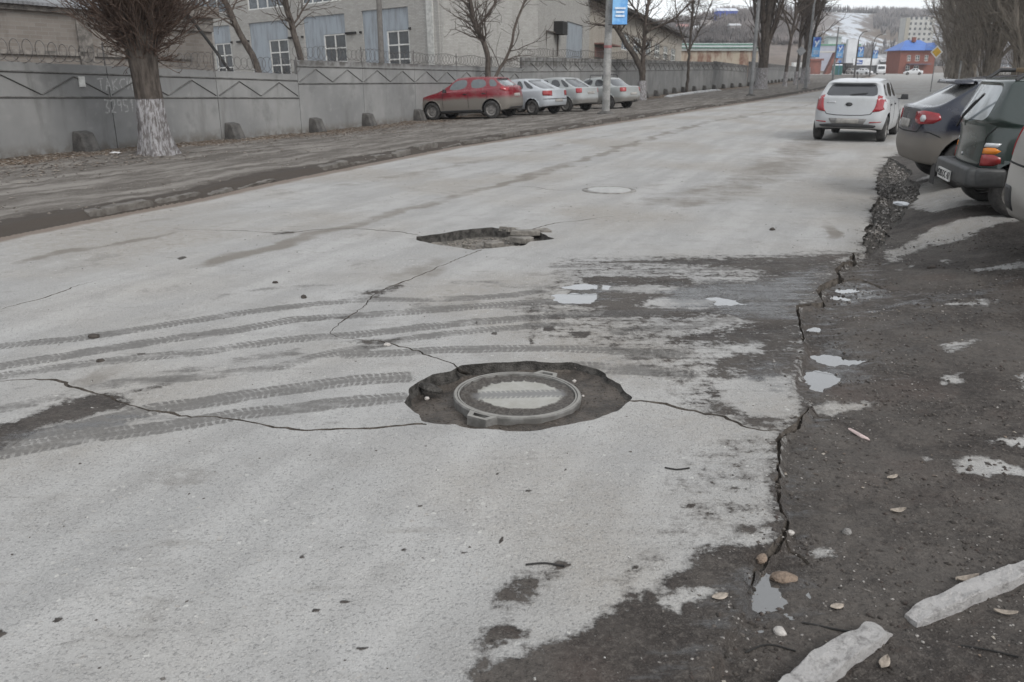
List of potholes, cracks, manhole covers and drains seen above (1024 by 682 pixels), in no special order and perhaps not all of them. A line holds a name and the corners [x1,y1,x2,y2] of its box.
pothole [862,158,921,256]
manhole cover [582,186,636,194]
manhole cover [453,370,582,427]
crack [6,378,427,431]
crack [330,250,481,375]
pothole [416,227,554,250]
pothole [404,361,632,431]
